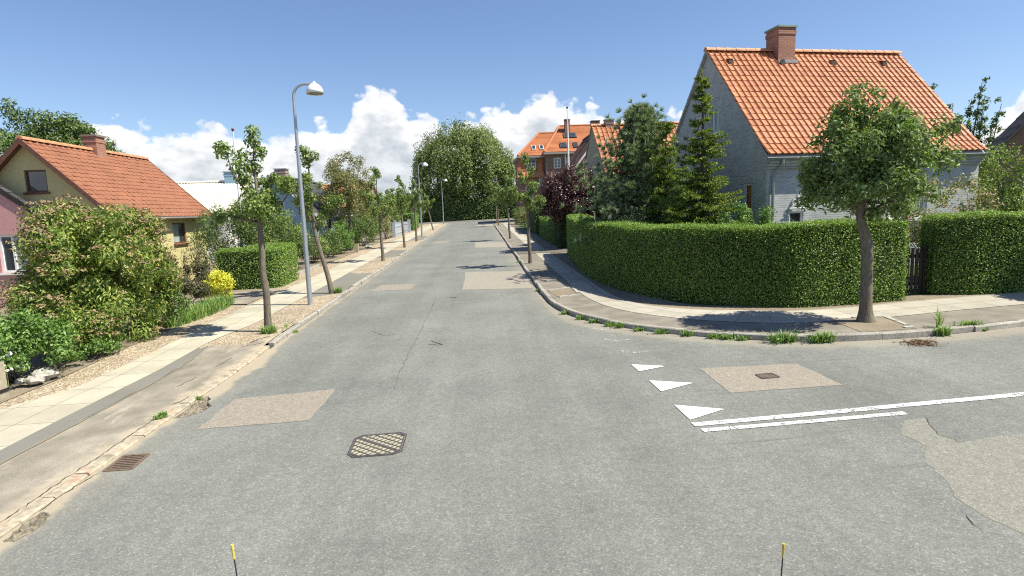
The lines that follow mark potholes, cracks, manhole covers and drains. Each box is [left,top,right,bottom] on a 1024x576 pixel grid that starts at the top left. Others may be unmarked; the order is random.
manhole cover [347,432,407,458]
drain grate [102,453,150,472]
pothole [4,512,51,542]
pothole [175,396,212,418]
